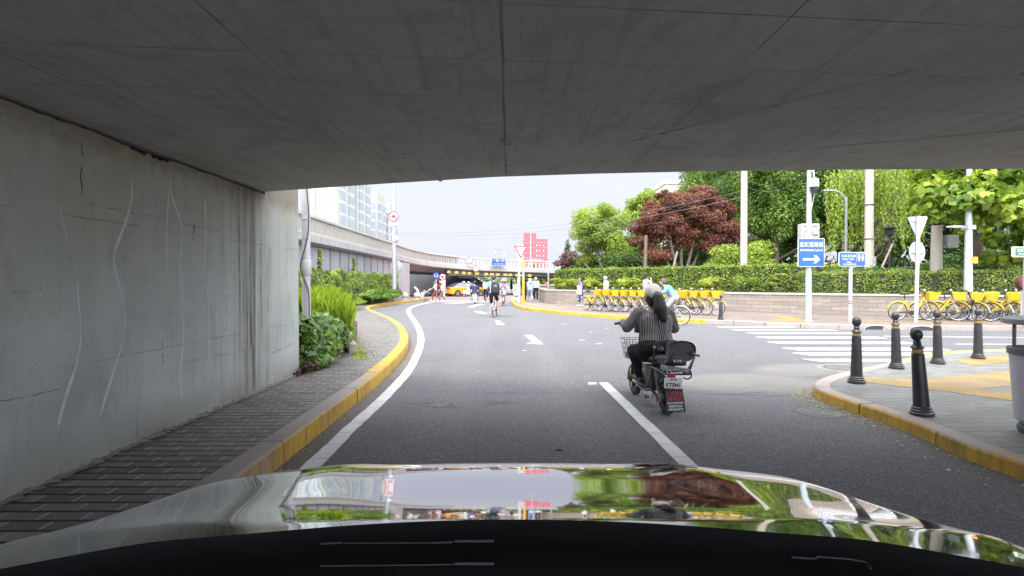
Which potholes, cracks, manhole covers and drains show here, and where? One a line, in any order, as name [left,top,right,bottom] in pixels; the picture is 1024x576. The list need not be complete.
manhole cover [793,406,846,418]
manhole cover [816,364,865,372]
